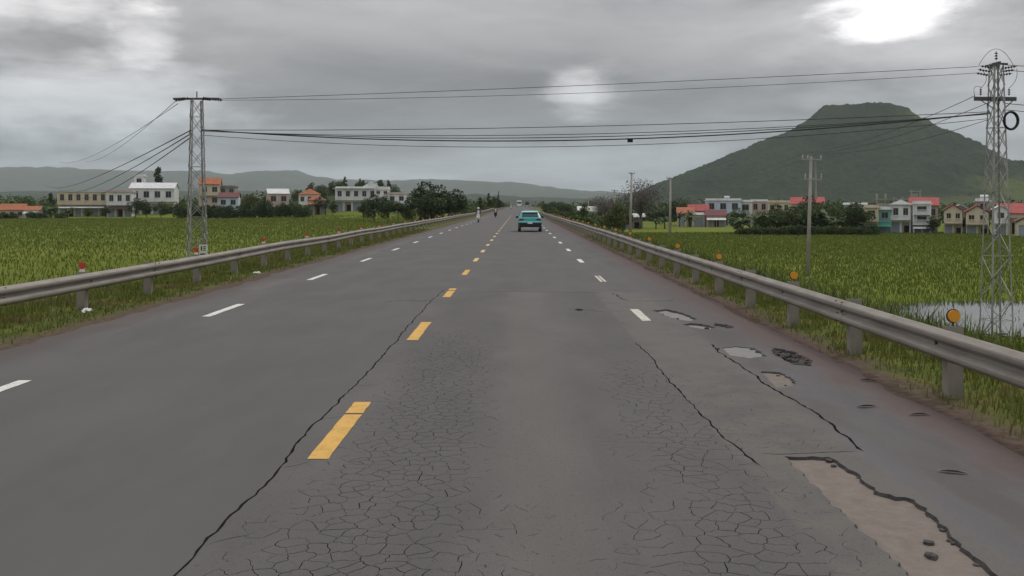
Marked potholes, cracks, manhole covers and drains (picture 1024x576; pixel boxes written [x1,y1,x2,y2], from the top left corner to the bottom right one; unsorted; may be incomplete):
pothole [715,346,766,358]
pothole [785,456,998,576]
crack [585,343,861,576]
pothole [653,309,696,321]
crack [173,290,555,576]
pothole [772,348,813,366]
pothole [761,371,797,388]
